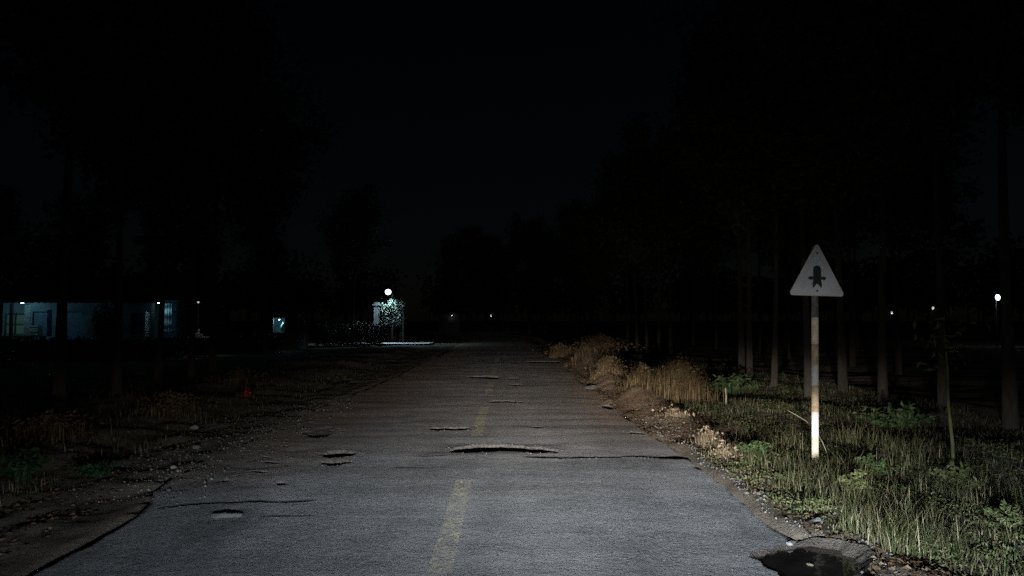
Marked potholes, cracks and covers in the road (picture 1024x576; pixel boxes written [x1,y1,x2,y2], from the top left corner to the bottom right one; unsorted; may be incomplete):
crack [159,500,317,517]
pothole [318,450,360,466]
pothole [302,427,348,438]
pothole [749,537,880,576]
pothole [449,444,559,453]
